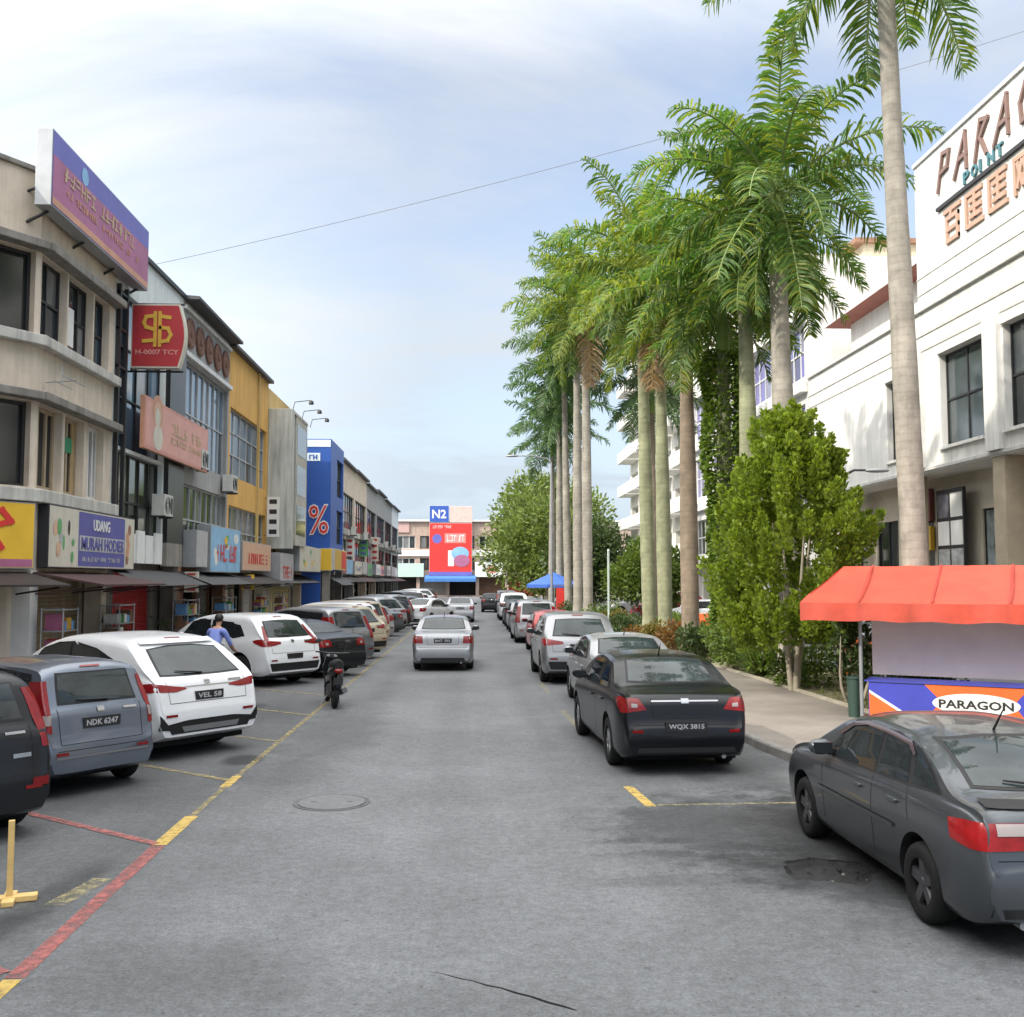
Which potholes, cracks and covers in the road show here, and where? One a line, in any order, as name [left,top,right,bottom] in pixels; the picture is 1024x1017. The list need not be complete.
manhole cover [293,794,370,811]
crack [434,972,577,1011]
pothole [783,857,881,885]
